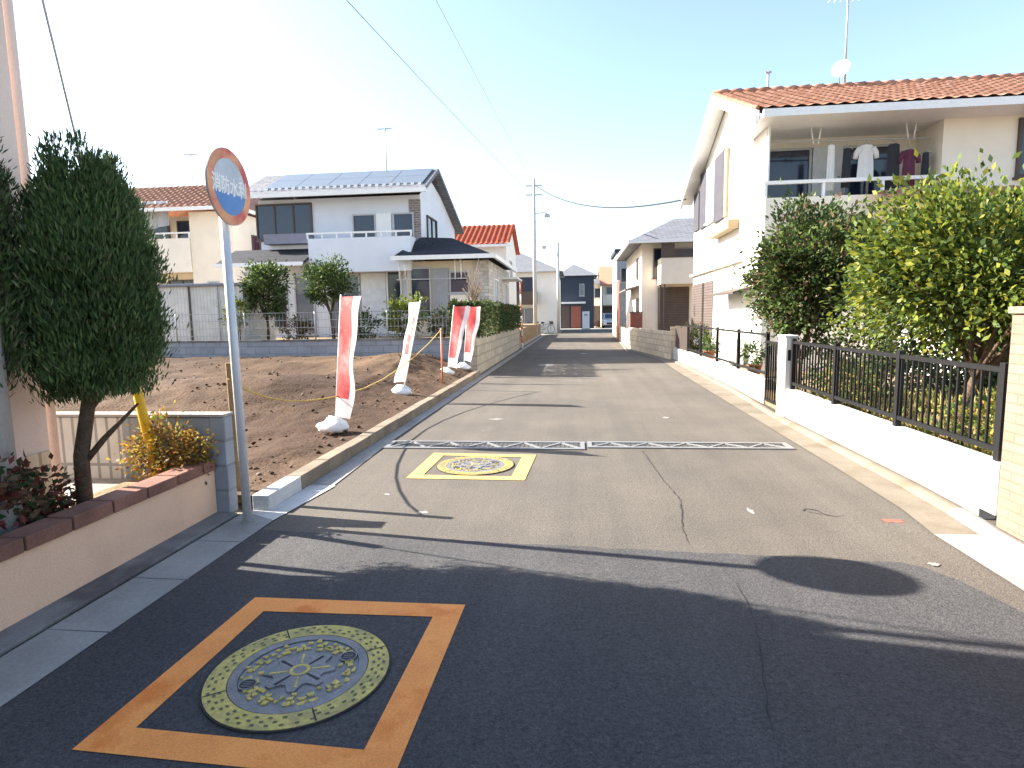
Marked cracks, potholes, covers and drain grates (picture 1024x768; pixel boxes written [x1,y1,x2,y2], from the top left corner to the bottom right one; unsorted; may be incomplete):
manhole cover [436,456,514,476]
crack [642,451,688,542]
manhole cover [199,625,391,734]
crack [735,580,779,758]
